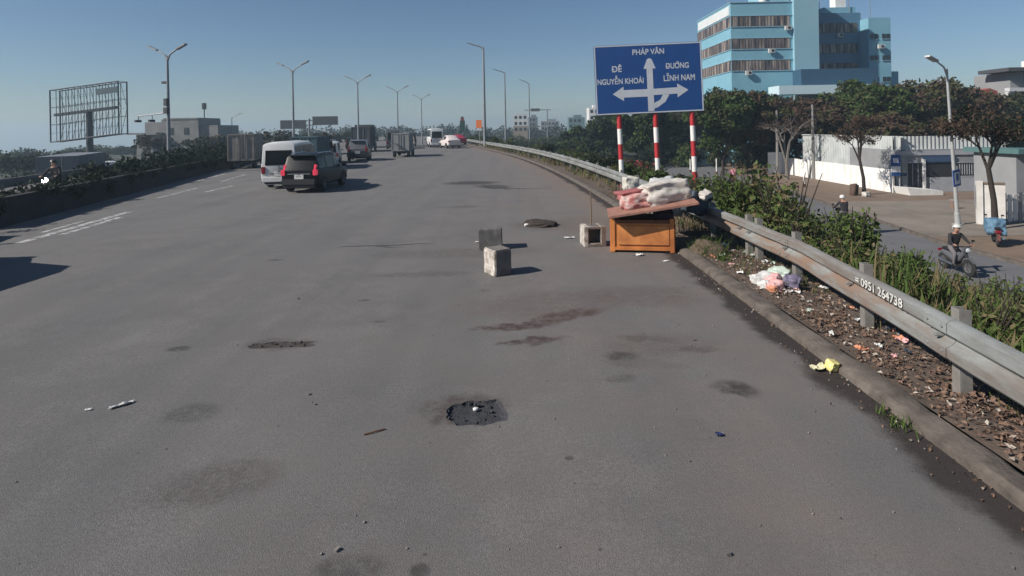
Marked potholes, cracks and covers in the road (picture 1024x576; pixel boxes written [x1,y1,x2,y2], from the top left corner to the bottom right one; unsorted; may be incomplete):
pothole [446,399,508,426]
pothole [248,341,315,349]
